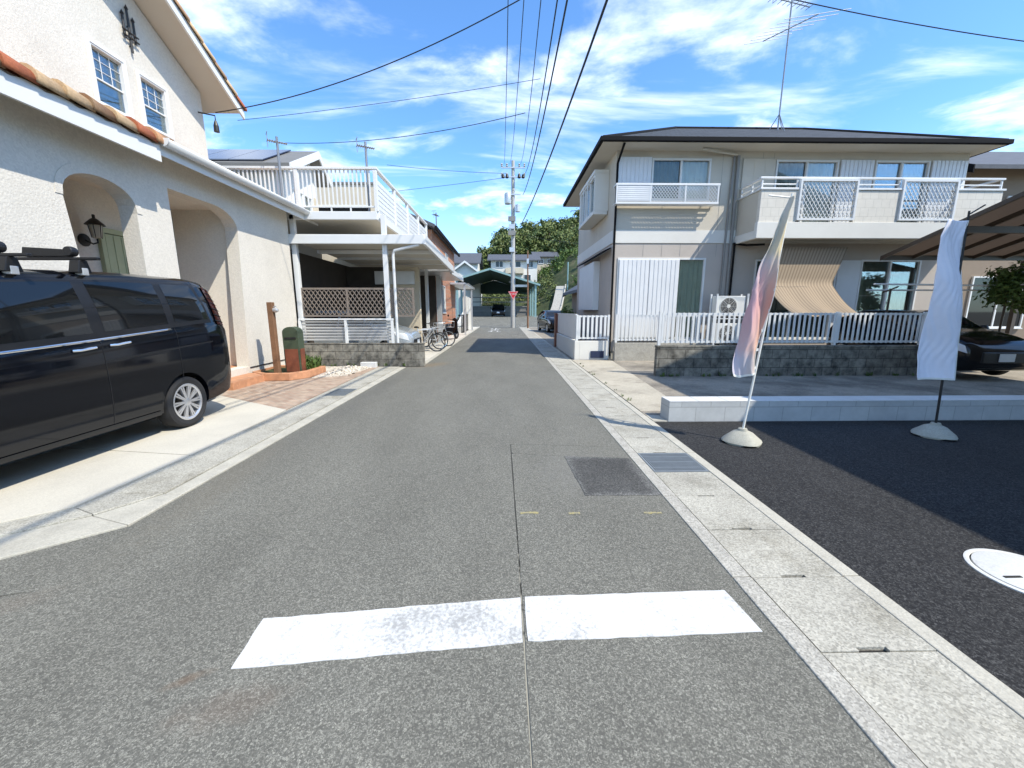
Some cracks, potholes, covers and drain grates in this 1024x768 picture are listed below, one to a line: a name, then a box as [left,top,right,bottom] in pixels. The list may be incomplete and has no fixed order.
manhole cover [963,548,1024,594]
drain grate [637,453,709,473]
